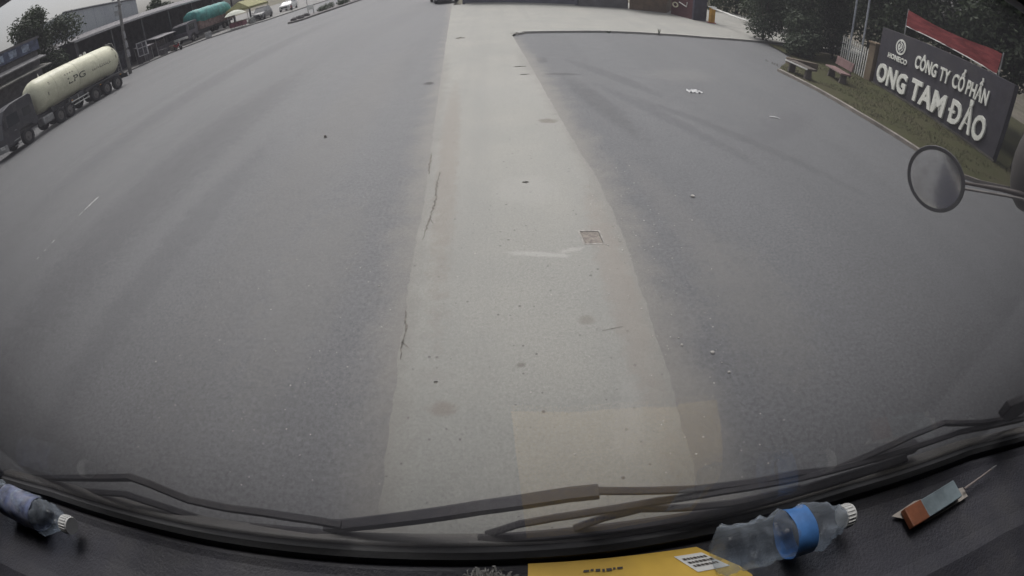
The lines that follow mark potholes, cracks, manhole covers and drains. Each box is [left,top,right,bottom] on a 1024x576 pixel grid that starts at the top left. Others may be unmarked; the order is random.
crack [400,310,409,360]
crack [422,153,441,240]
manhole cover [578,230,606,245]
